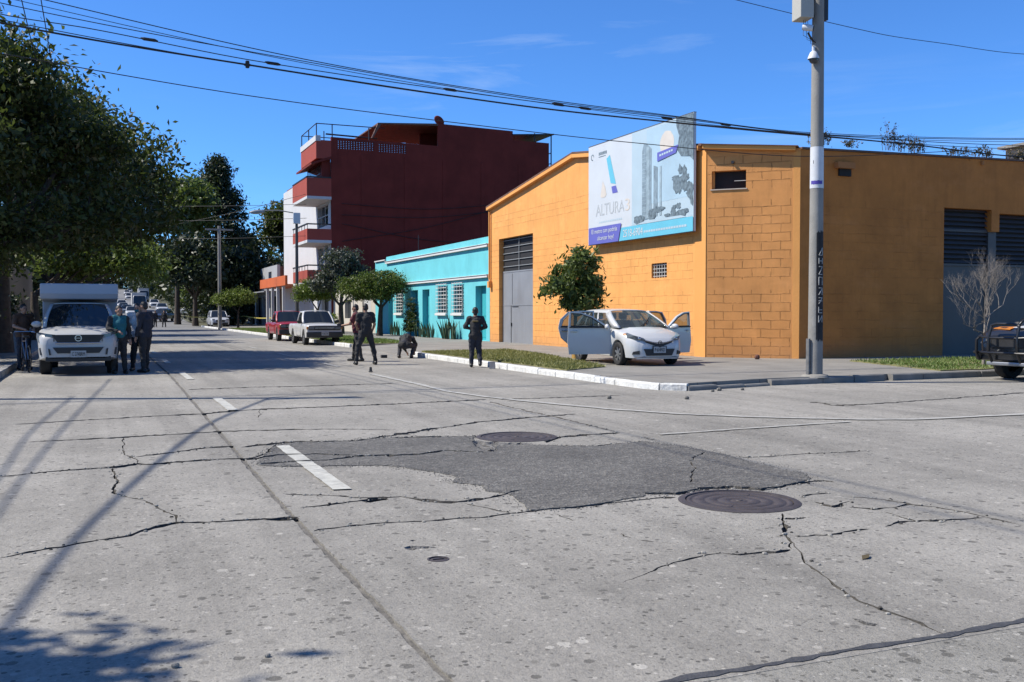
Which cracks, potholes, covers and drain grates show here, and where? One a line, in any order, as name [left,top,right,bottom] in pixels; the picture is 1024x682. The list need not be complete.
manhole cover [476,431,557,443]
crack [0,395,1019,633]
manhole cover [678,490,802,513]
